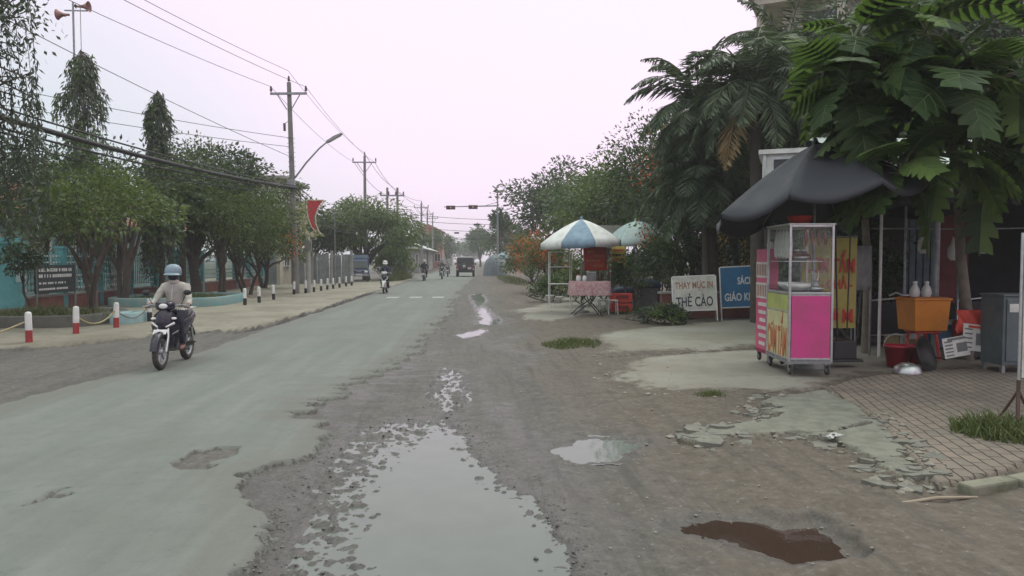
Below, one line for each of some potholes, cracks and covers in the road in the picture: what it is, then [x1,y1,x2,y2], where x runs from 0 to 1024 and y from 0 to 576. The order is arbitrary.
pothole [420,366,476,414]
pothole [650,506,876,568]
pothole [467,293,505,325]
pothole [540,433,658,466]
pothole [451,328,491,339]
pothole [170,445,244,470]
pothole [267,413,590,576]
